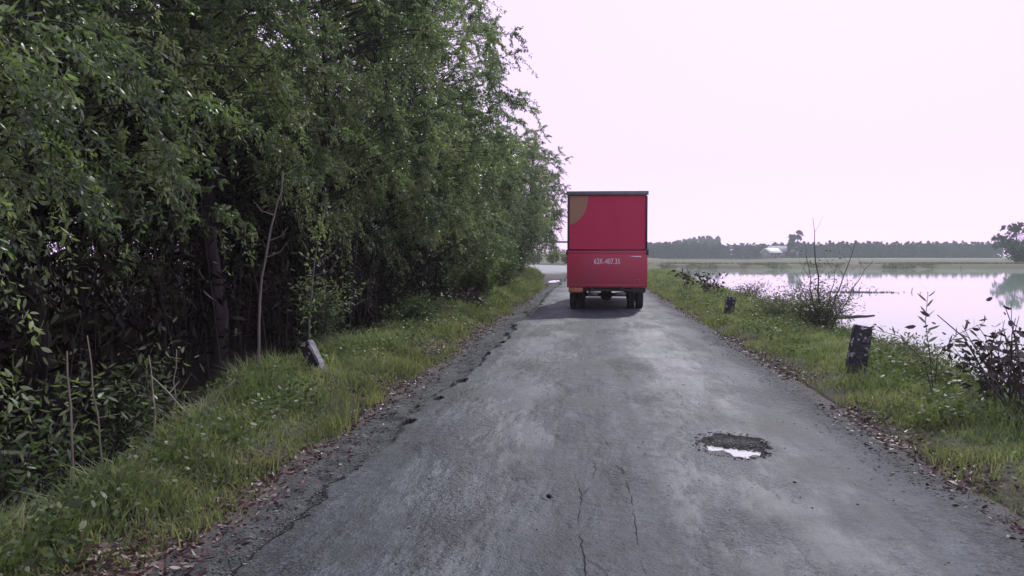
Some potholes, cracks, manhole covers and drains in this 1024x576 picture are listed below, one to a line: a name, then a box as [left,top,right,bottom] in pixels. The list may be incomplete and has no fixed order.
crack [230,465,362,576]
crack [574,442,655,576]
pothole [539,493,557,501]
pothole [690,431,778,460]
pothole [395,418,421,432]
